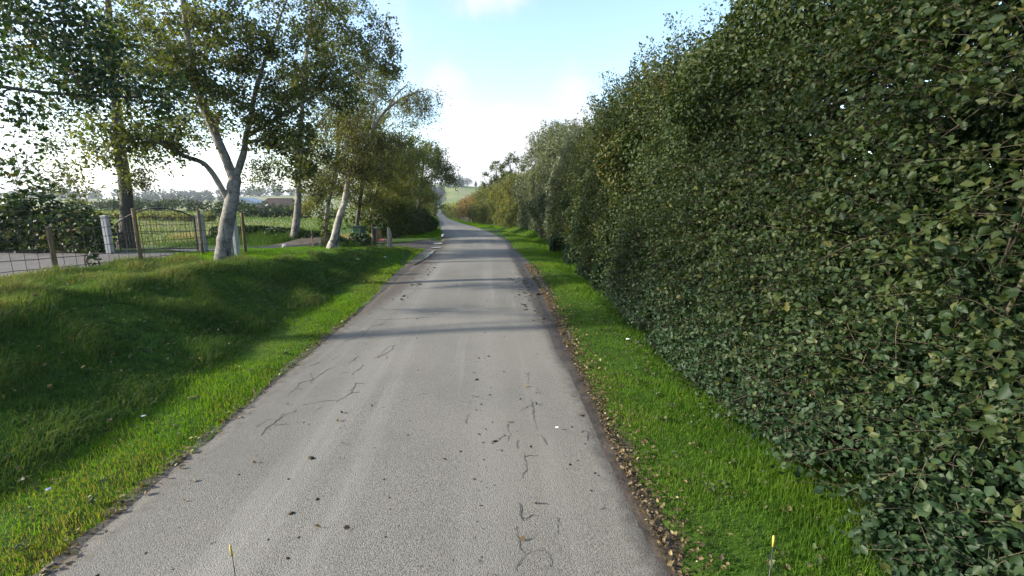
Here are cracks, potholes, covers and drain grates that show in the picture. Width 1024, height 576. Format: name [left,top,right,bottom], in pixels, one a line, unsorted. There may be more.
crack [256,317,425,435]
crack [515,503,558,569]
crack [499,372,544,474]
